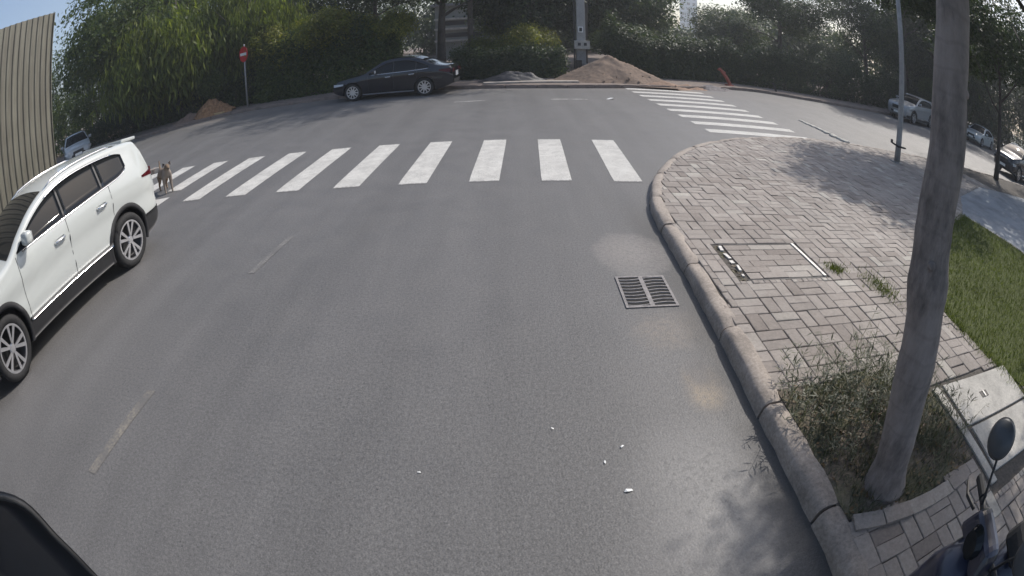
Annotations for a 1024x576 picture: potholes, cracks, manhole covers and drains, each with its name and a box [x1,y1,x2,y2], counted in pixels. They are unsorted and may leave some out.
manhole cover [714,243,827,281]
drain grate [615,275,680,309]
